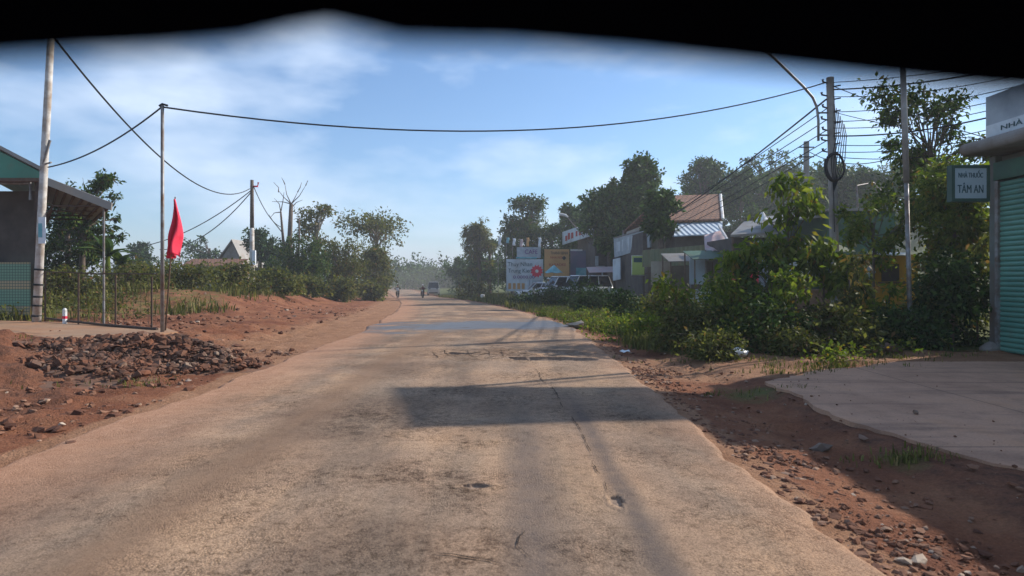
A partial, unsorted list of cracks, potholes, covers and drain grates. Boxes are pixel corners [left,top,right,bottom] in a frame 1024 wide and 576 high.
crack [537,370,607,489]
crack [420,346,523,360]
pothole [448,481,502,492]
pothole [603,492,631,514]
